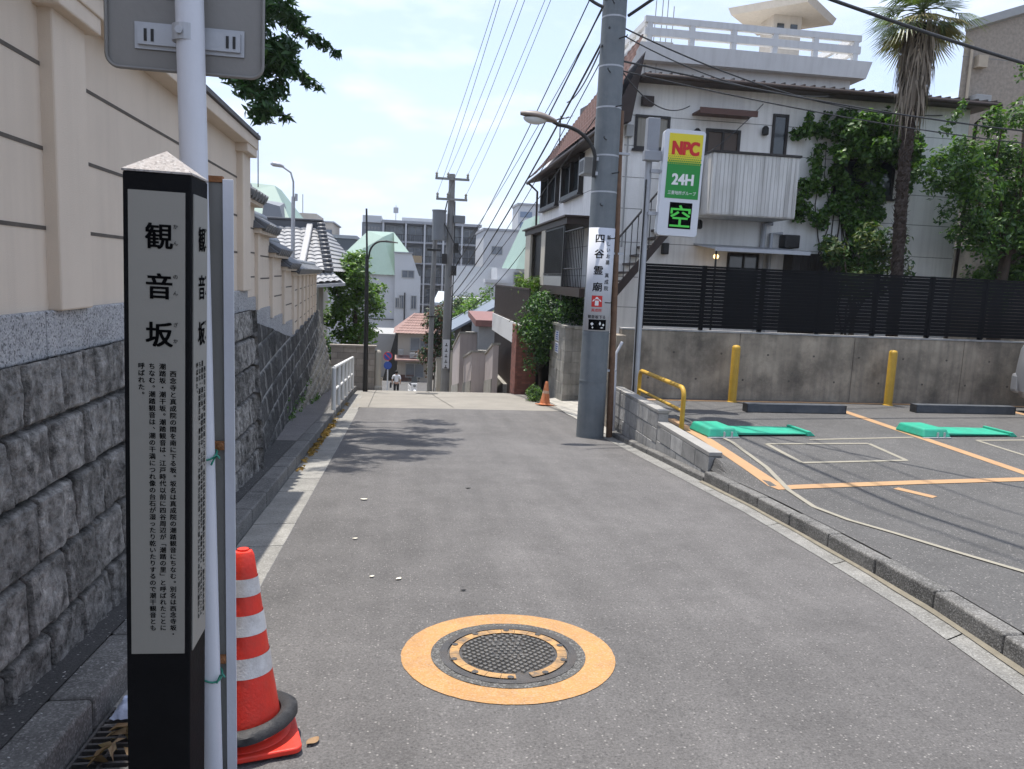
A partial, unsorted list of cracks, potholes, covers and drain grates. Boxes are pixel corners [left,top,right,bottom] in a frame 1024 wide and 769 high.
manhole cover [431,624,585,688]
drain grate [66,707,128,769]
